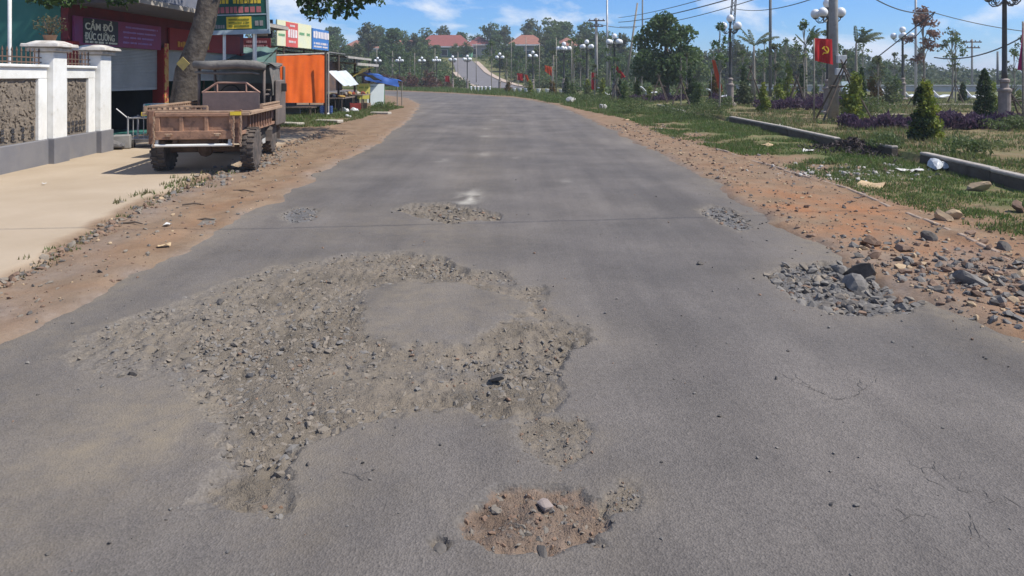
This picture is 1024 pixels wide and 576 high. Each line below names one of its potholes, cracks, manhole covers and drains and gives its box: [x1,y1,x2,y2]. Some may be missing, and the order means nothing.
pothole [275,206,321,225]
crack [908,460,974,493]
pothole [597,476,650,521]
crack [775,367,878,399]
pothole [389,202,505,225]
pothole [425,532,457,554]
pothole [762,257,928,317]
pothole [57,250,600,521]
pothole [694,204,757,233]
pothole [453,480,616,557]
crack [968,494,1022,549]
